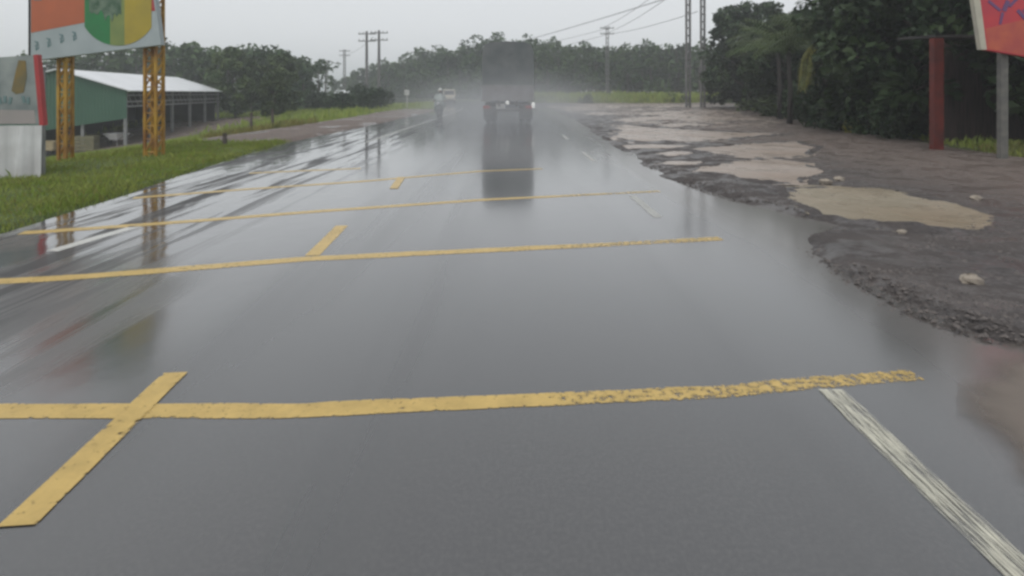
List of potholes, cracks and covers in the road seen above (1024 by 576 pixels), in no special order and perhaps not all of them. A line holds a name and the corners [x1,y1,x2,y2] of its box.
pothole [687,158,824,186]
